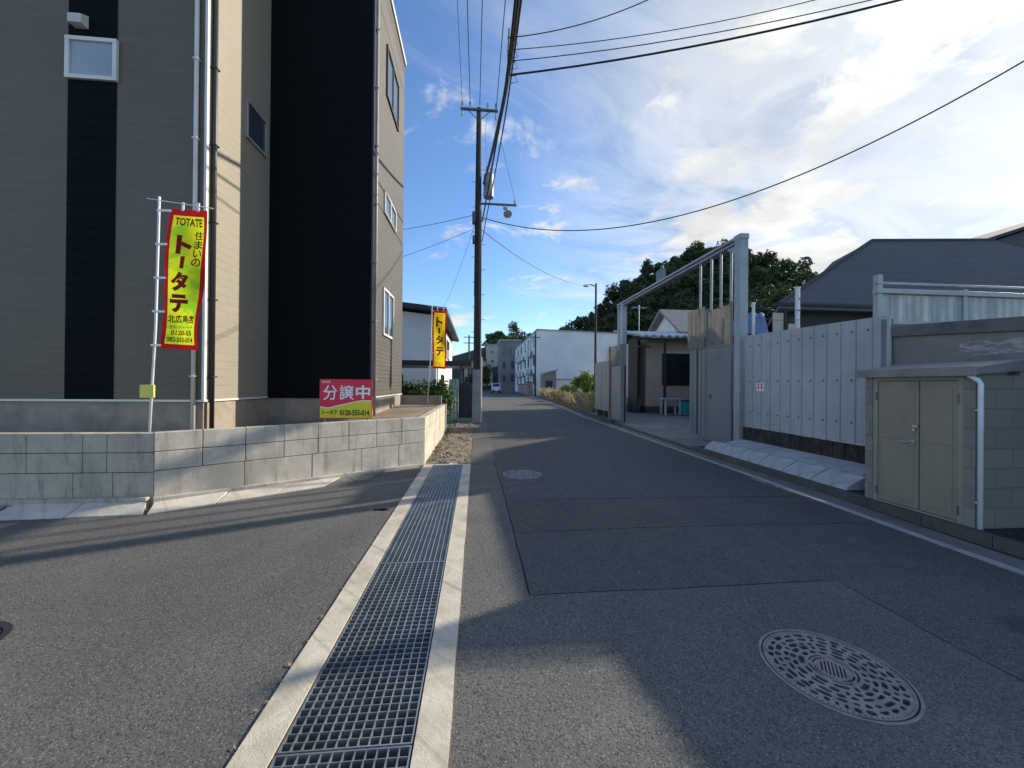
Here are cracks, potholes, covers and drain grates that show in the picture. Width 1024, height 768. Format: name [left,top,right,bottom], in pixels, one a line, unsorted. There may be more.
manhole cover [0,621,13,641]
drain grate [276,561,445,755]
drain grate [380,502,456,563]
manhole cover [758,629,926,726]
manhole cover [502,470,542,479]
drain grate [269,745,412,768]
drain grate [413,472,461,502]
